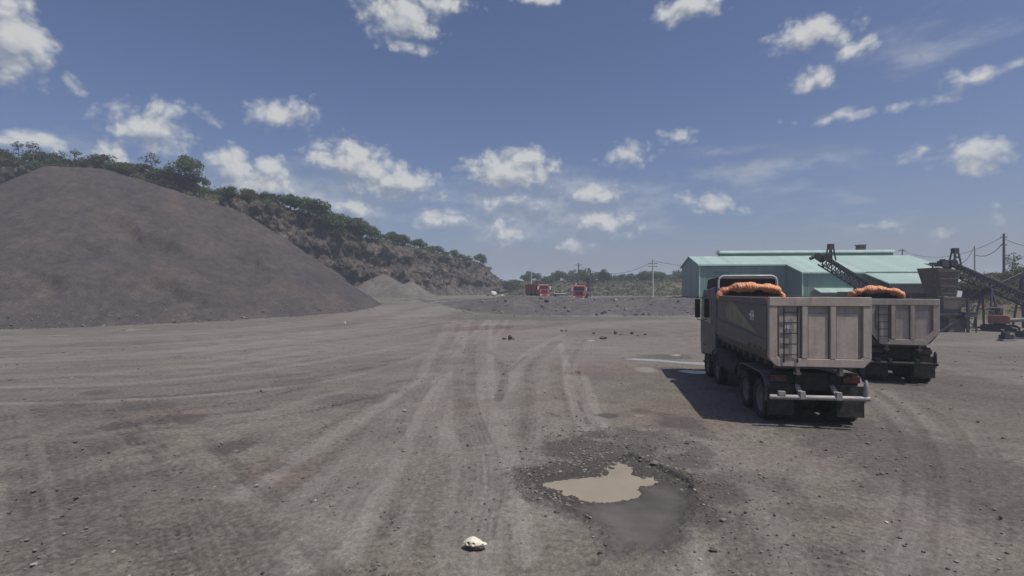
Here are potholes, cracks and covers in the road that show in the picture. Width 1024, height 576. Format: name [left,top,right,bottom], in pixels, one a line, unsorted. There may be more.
pothole [511,450,715,565]
